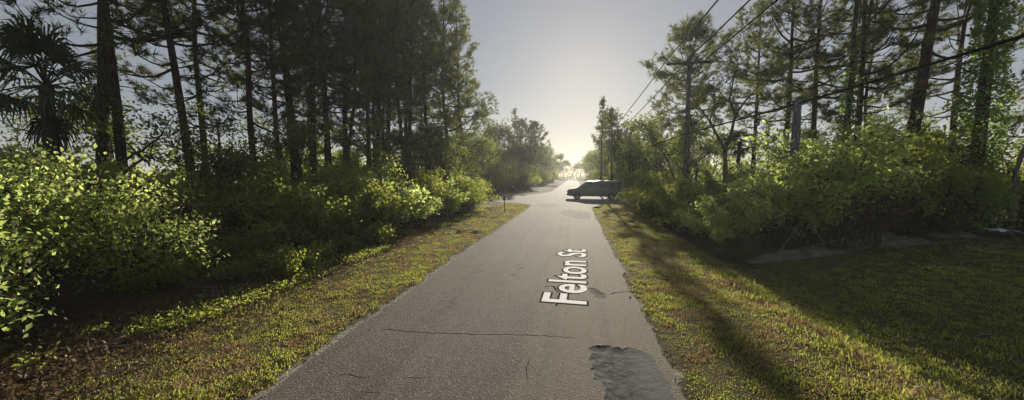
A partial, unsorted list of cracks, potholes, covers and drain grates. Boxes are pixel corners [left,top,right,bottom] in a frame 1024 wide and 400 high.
crack [387,329,572,338]
